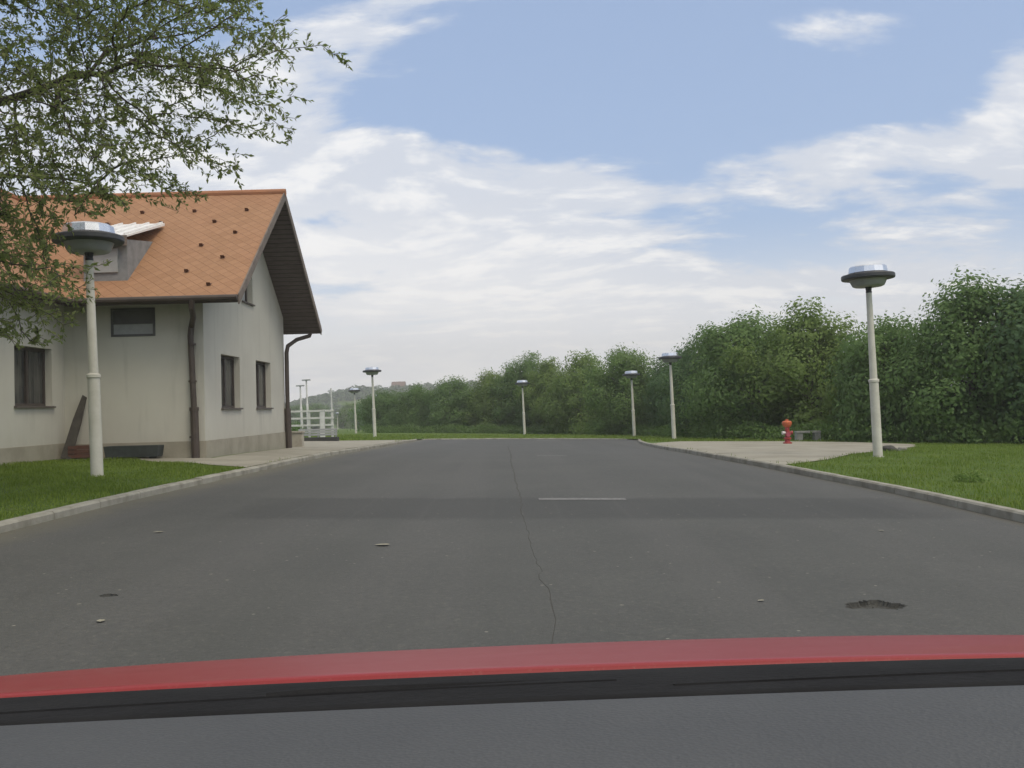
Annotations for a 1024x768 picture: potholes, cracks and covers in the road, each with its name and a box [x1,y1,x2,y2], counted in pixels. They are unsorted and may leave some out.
crack [507,445,556,644]
pothole [845,600,908,610]
